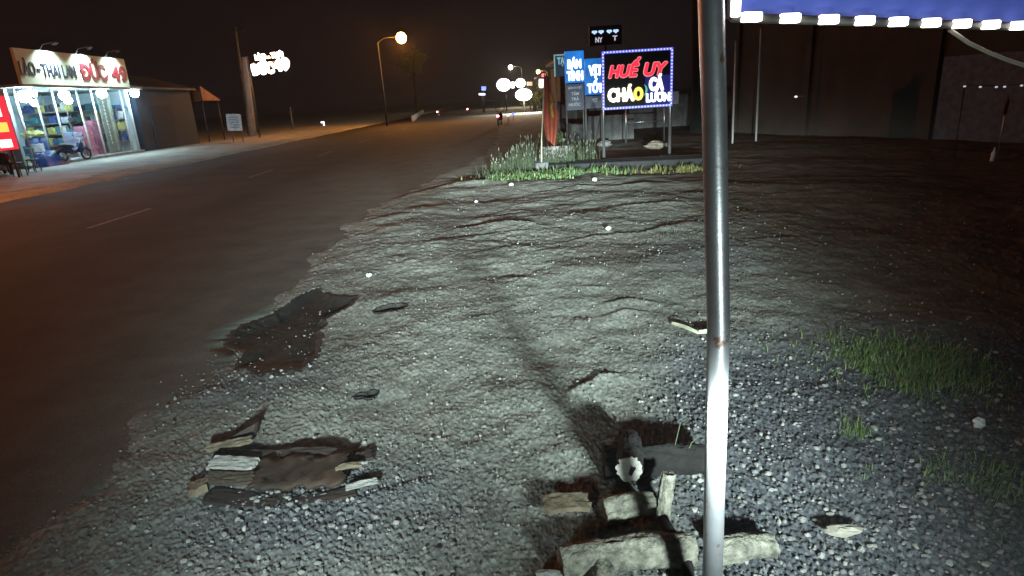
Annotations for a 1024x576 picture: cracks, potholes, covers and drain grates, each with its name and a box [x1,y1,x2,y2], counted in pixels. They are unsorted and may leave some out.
pothole [223,288,359,378]
pothole [372,303,409,313]
pothole [351,389,380,400]
